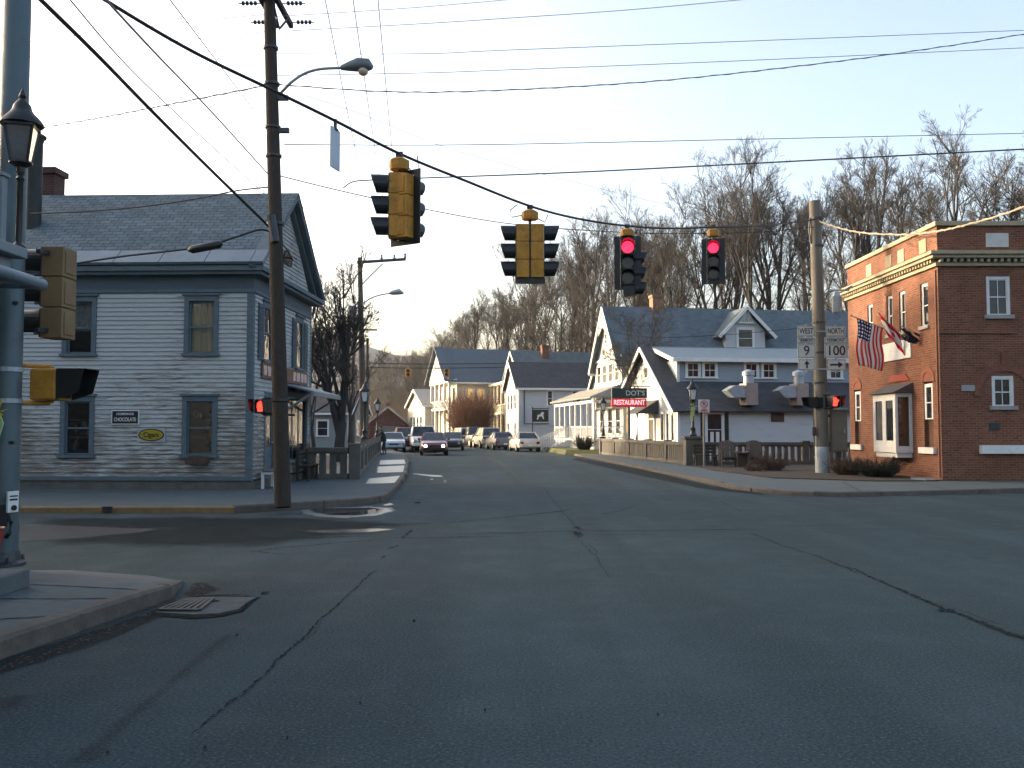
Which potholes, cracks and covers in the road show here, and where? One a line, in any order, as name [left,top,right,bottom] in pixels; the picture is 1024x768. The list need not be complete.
crack [191,511,726,734]
drain grate [145,595,259,619]
